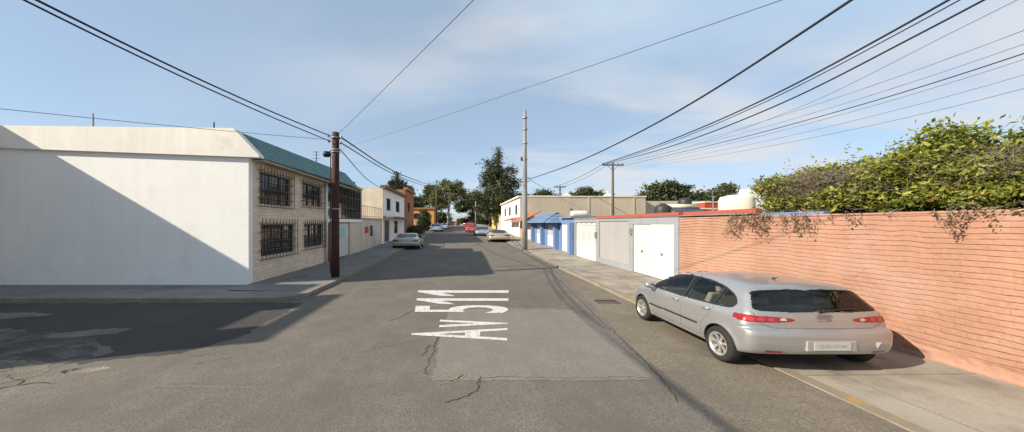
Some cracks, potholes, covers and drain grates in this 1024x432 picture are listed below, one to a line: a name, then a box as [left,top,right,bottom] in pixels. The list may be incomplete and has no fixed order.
crack [0,339,121,388]
crack [359,337,481,403]
